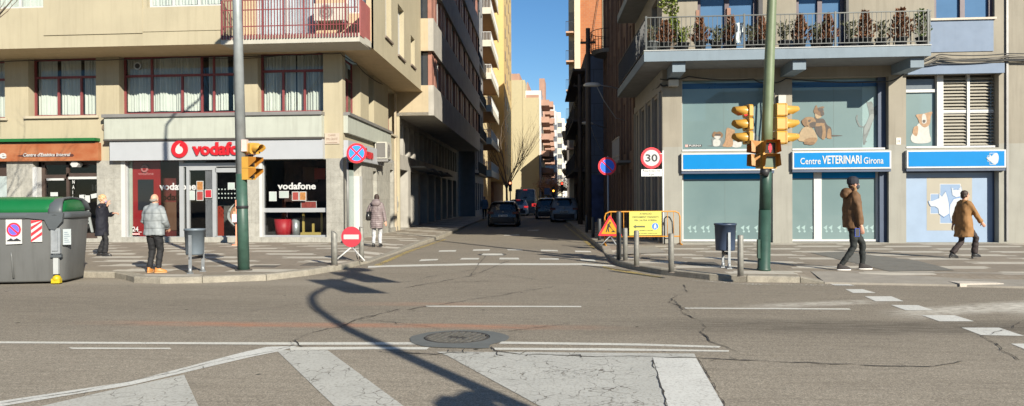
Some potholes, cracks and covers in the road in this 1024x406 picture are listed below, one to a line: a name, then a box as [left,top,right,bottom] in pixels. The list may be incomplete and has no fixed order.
crack [491,285,961,406]
manhole cover [410,330,509,348]
